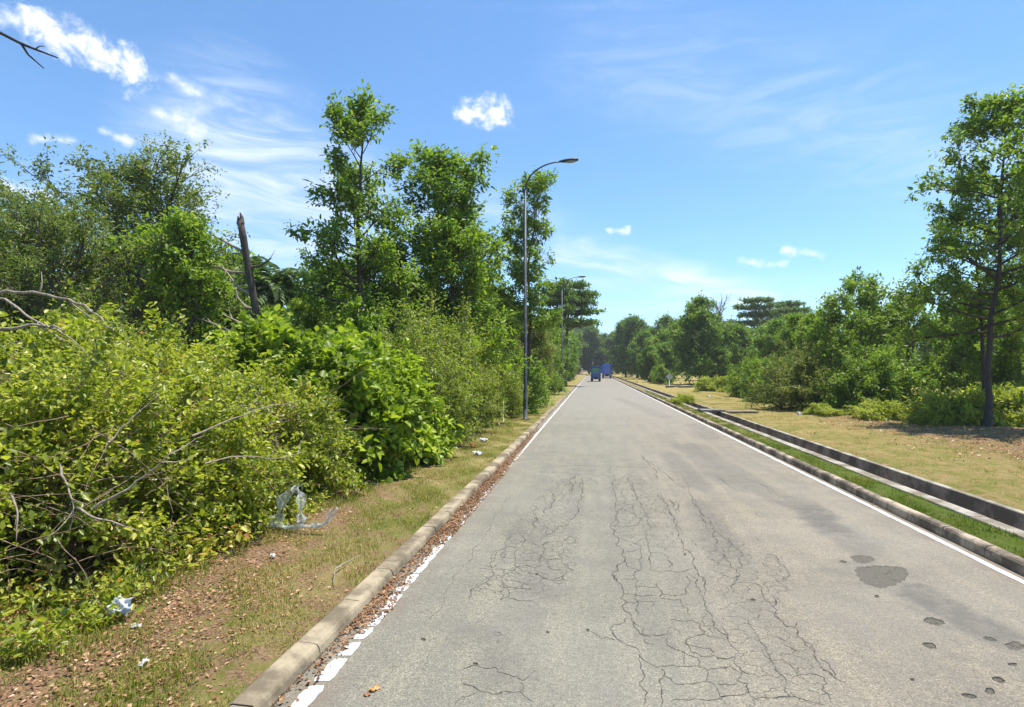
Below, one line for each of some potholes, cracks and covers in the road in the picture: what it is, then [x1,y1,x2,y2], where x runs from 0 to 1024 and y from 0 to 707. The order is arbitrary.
pothole [850,555,875,564]
pothole [855,565,909,589]
crack [455,664,534,704]
pothole [923,617,945,626]
pothole [1004,641,1024,650]
crack [469,456,844,706]
